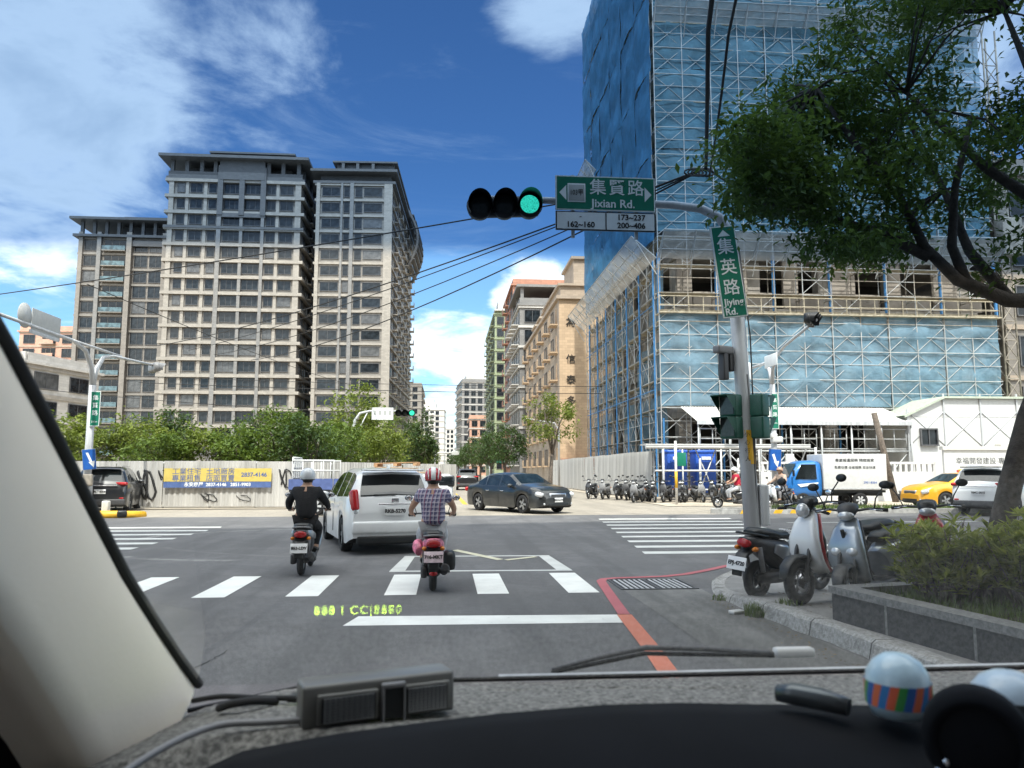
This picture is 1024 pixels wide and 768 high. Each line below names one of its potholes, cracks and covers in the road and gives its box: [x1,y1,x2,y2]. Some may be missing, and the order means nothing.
drain grate [607,578,699,590]
